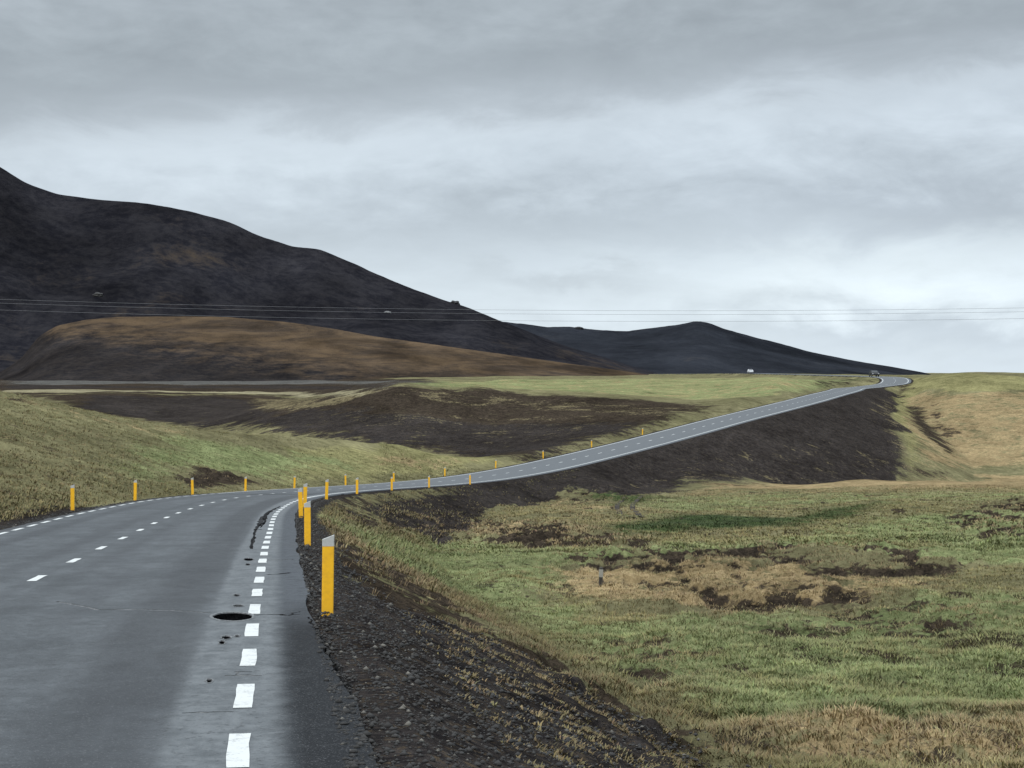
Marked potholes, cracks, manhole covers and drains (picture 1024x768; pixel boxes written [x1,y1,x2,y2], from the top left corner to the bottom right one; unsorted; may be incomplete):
crack [60,602,204,613]
crack [249,506,292,575]
pothole [210,611,255,622]
